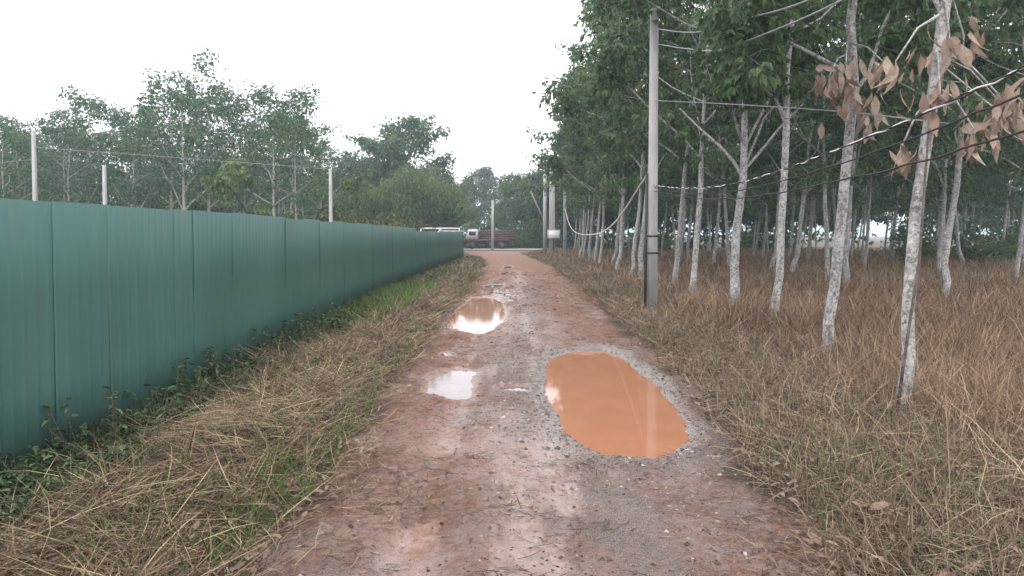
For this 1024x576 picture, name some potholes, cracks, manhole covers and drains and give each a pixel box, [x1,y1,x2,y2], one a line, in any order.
pothole [442,296,510,334]
pothole [536,344,700,459]
pothole [422,367,481,400]
